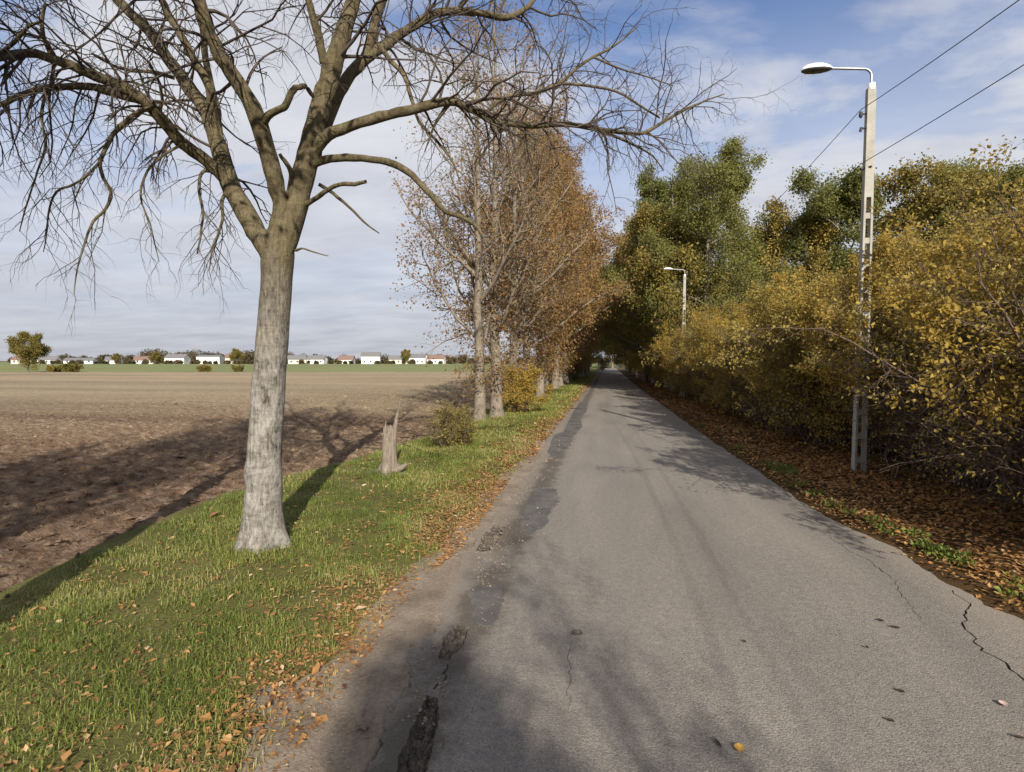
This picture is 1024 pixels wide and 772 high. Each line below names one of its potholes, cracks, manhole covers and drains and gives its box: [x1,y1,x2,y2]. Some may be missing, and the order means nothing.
crack [953,592,1024,680]
crack [820,531,925,624]
pothole [396,695,440,772]
pothole [438,624,469,660]
pothole [476,525,505,552]
